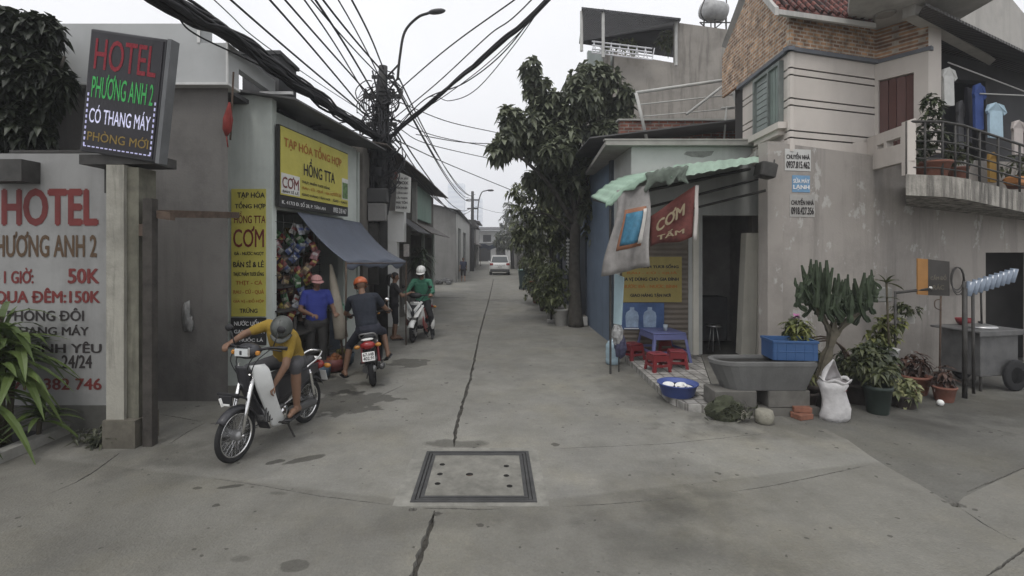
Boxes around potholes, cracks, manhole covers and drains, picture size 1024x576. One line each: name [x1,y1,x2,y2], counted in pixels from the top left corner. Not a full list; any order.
crack [453,279,494,447]
manhole cover [392,448,549,507]
crack [409,508,492,576]
